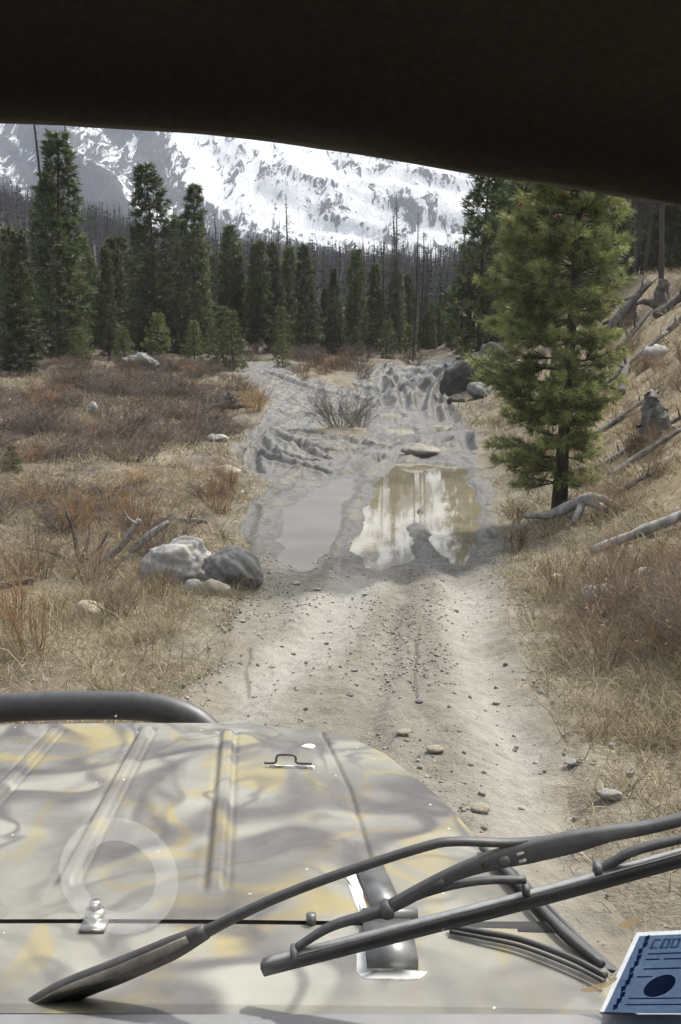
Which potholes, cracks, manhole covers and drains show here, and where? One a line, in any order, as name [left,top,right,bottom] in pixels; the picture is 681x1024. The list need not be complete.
pothole [343,460,496,574]
pothole [257,471,372,575]
